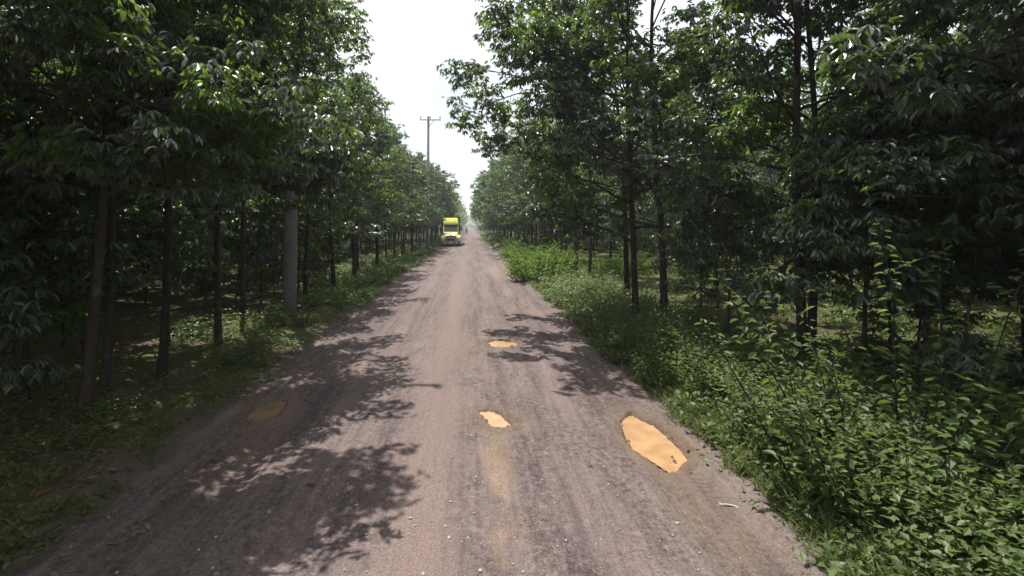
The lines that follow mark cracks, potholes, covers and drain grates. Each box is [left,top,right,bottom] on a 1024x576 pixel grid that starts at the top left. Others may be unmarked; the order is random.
pothole [479,338,524,350]
pothole [468,405,524,433]
pothole [611,408,700,479]
pothole [230,396,298,427]
